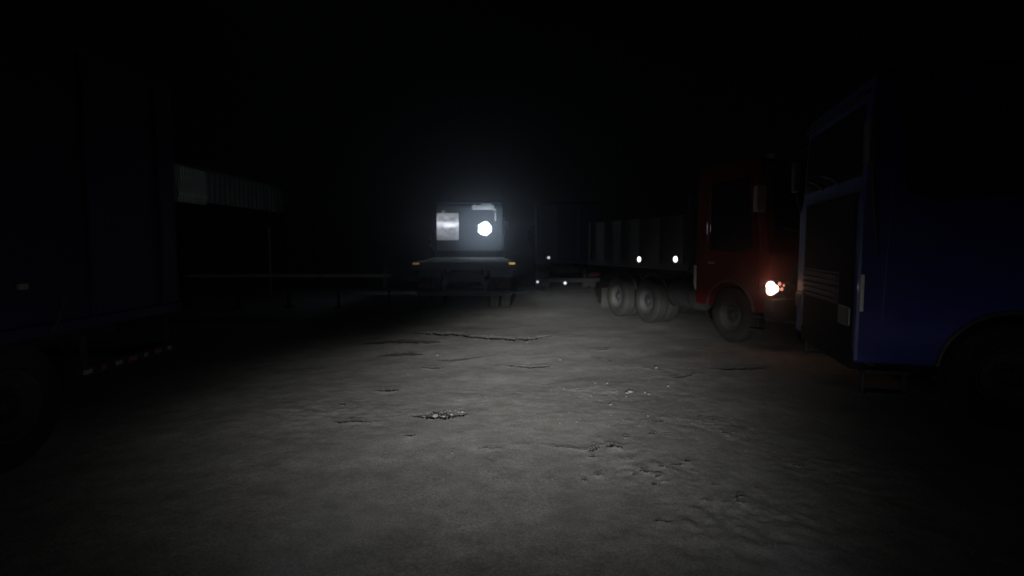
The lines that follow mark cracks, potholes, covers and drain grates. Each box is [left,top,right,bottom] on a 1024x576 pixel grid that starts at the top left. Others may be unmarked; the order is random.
crack [416,331,554,369]
pothole [412,410,470,420]
